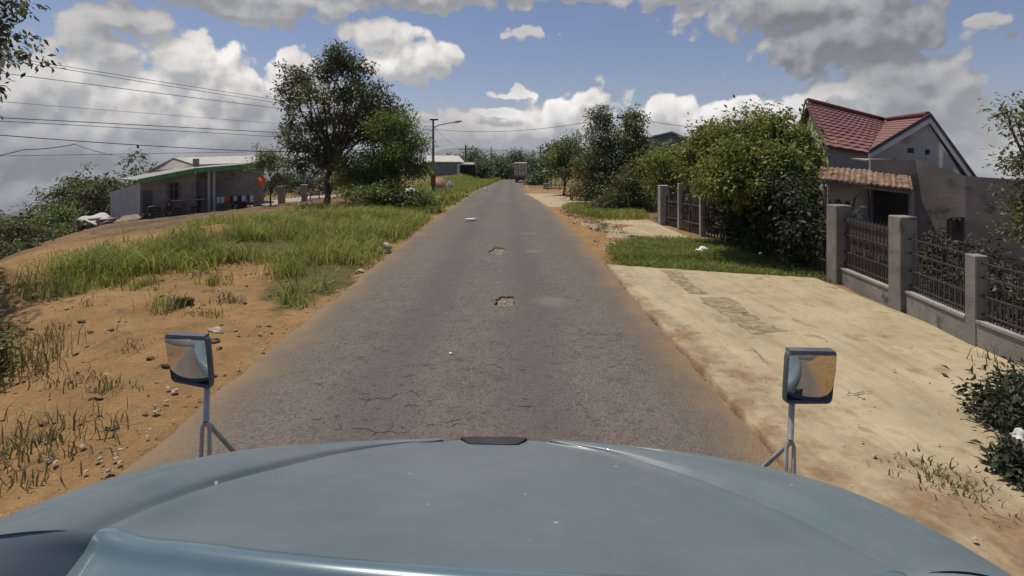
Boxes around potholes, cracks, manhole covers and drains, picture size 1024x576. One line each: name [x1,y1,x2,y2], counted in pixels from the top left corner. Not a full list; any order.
pothole [494,296,515,307]
